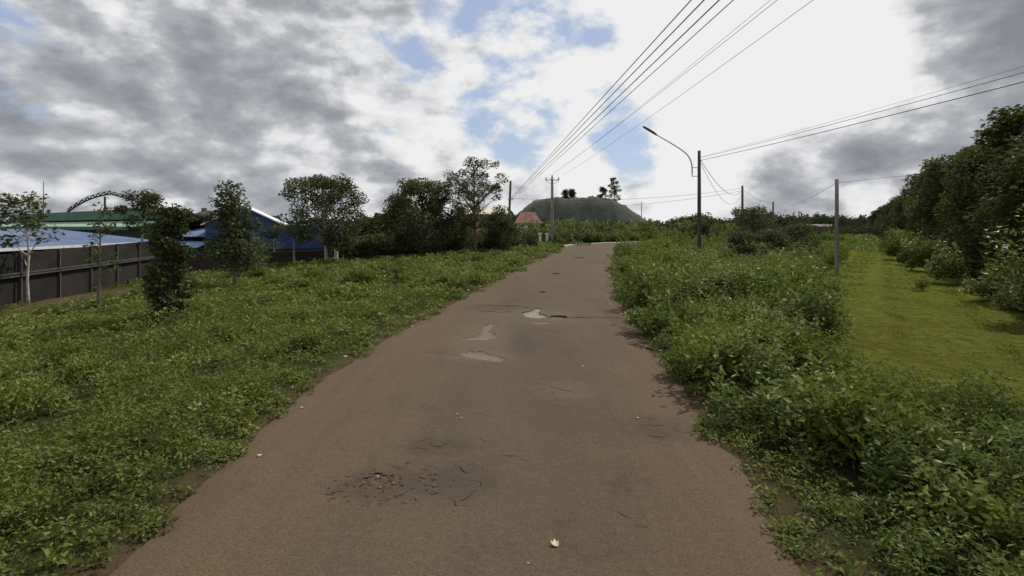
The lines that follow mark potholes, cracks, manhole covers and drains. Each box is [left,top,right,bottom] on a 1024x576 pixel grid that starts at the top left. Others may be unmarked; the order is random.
crack [323,439,481,507]
pothole [358,472,405,492]
